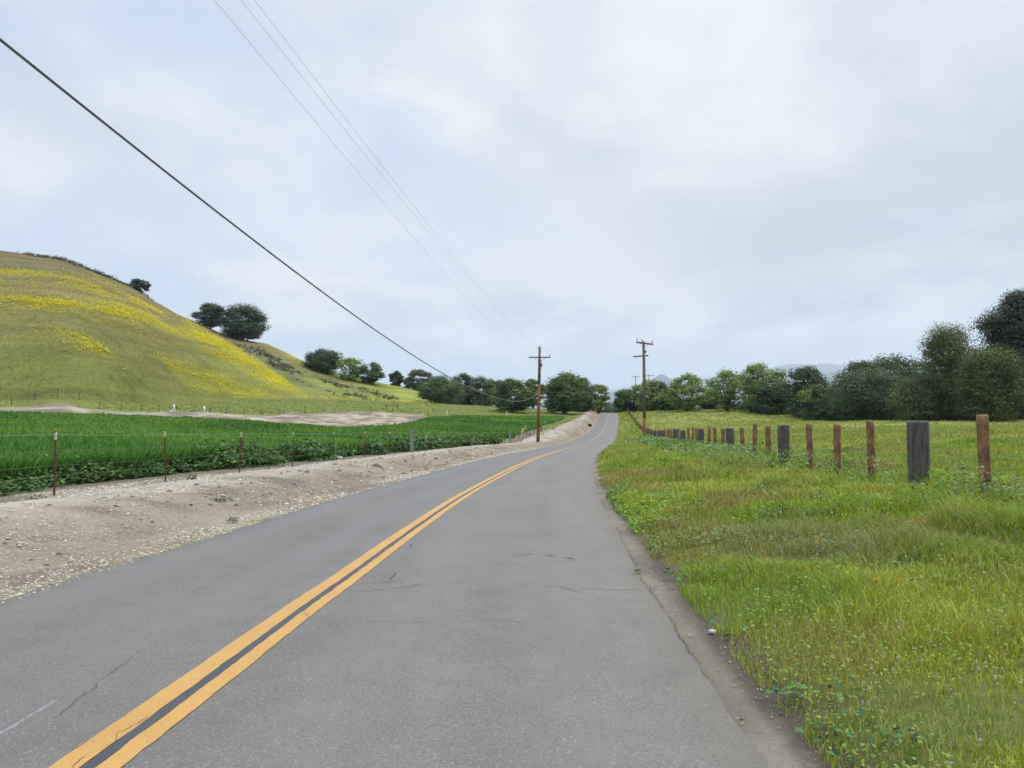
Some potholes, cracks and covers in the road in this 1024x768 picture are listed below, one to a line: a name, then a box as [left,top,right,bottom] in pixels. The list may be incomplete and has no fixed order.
crack [520,527,714,681]
crack [48,641,164,719]
